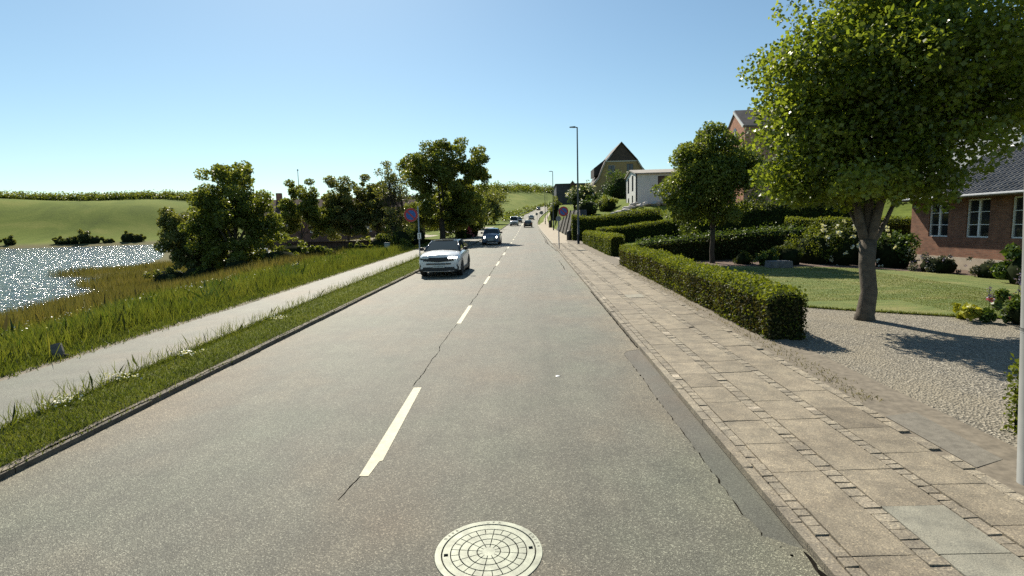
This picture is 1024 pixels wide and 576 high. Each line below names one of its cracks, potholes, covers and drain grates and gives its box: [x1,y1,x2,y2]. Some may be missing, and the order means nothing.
manhole cover [434,521,543,576]
